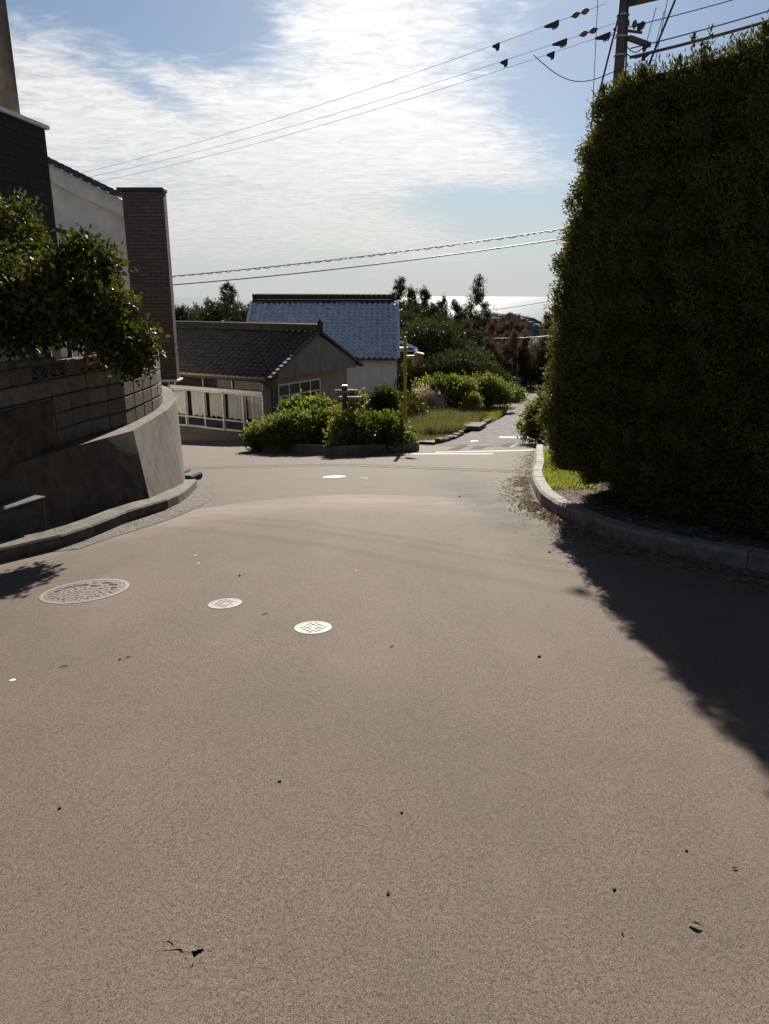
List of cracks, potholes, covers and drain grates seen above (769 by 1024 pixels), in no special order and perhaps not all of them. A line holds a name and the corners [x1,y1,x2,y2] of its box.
crack [163,941,211,968]
manhole cover [39,579,130,604]
